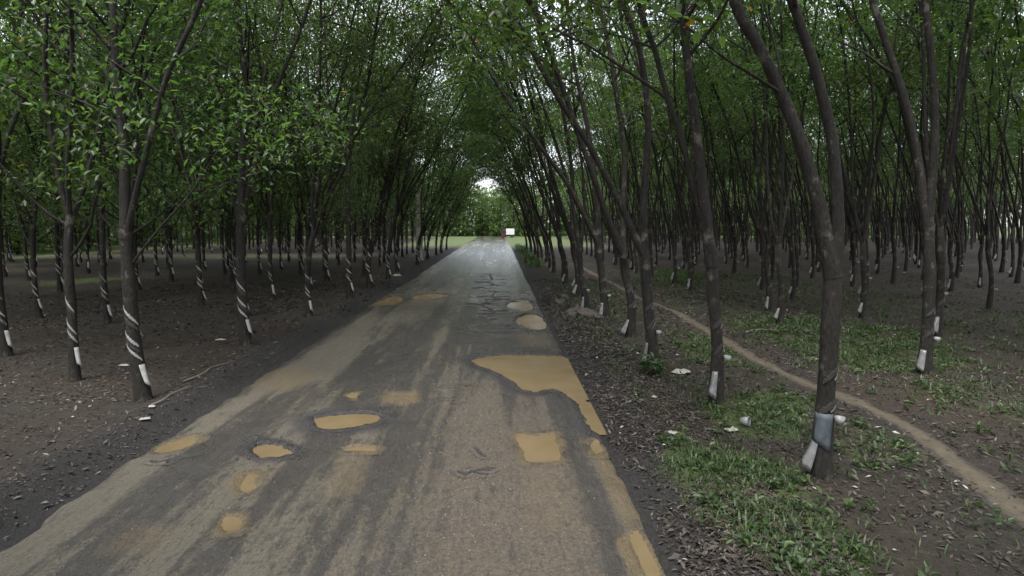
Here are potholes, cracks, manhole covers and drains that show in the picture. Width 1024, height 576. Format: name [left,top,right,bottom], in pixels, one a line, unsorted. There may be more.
crack [456,273,529,332]
pothole [302,408,391,433]
pothole [236,437,307,463]
pothole [202,507,261,541]
